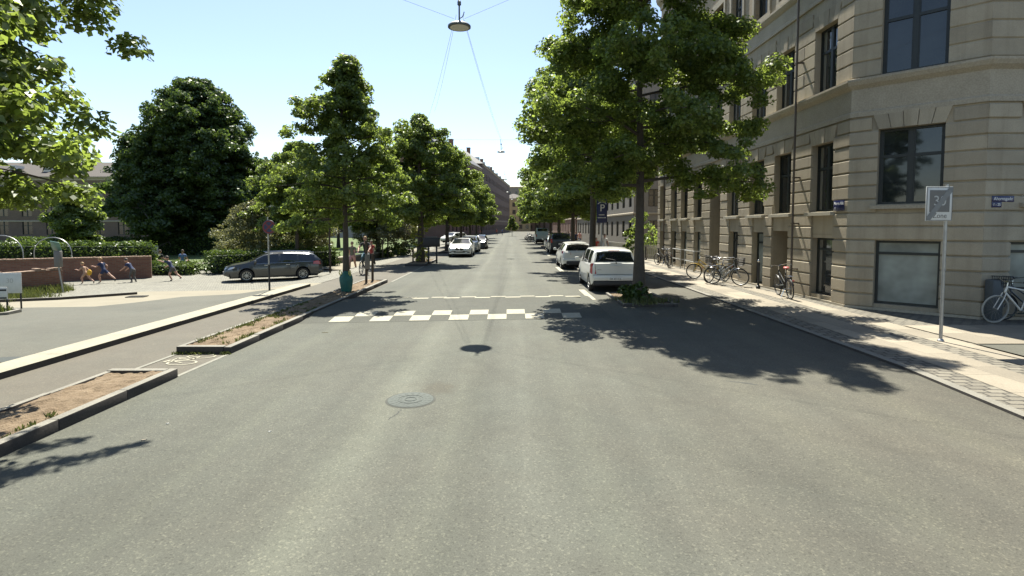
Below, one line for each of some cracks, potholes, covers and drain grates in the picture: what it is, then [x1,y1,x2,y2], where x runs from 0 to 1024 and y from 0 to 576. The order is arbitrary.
manhole cover [385,392,436,408]
